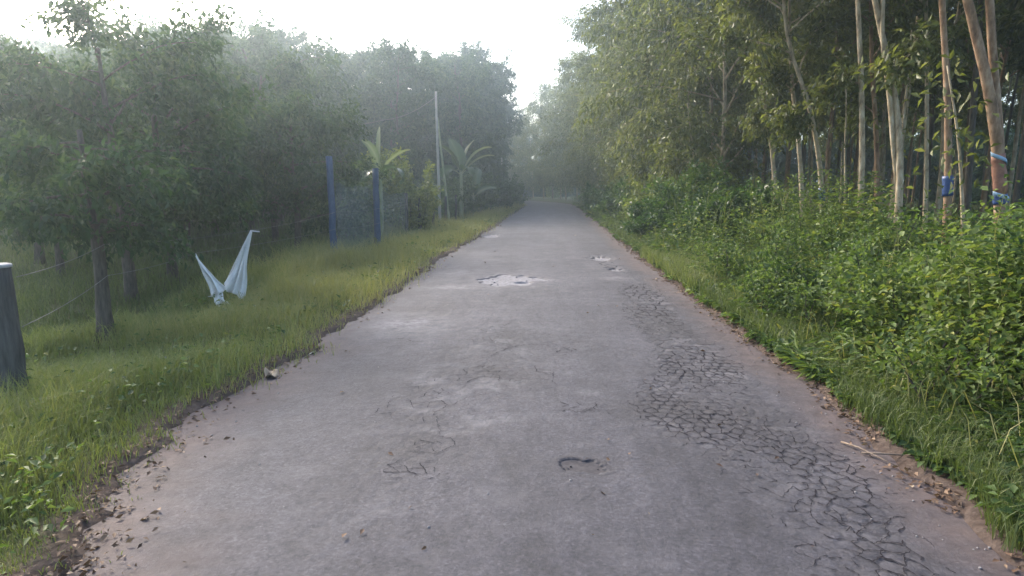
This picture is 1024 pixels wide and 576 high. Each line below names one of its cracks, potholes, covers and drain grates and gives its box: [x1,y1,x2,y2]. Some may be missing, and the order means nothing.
pothole [470,273,557,288]
crack [618,284,956,576]
